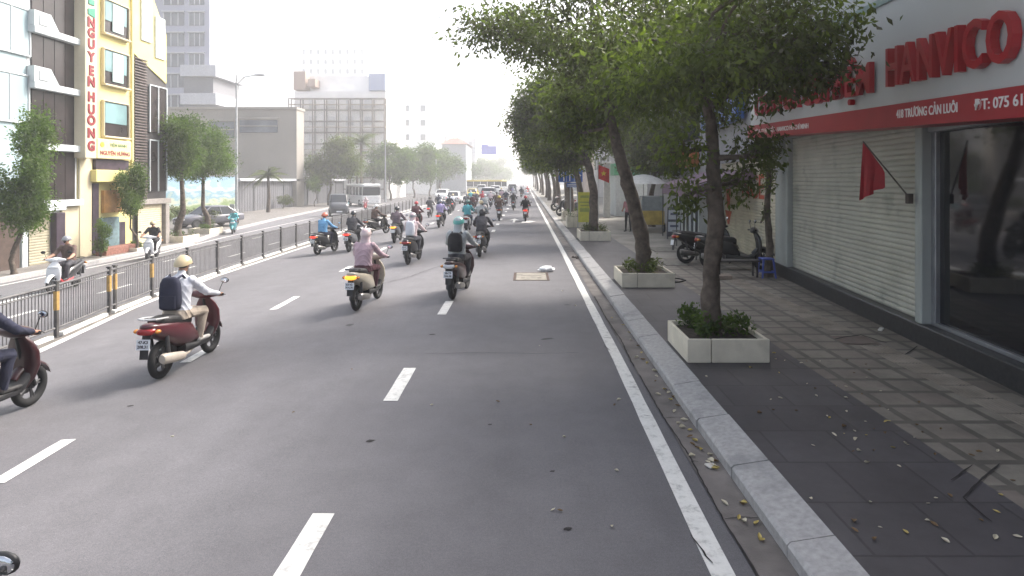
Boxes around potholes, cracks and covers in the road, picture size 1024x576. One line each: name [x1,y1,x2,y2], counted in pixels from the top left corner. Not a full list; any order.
manhole cover [513,272,550,281]
